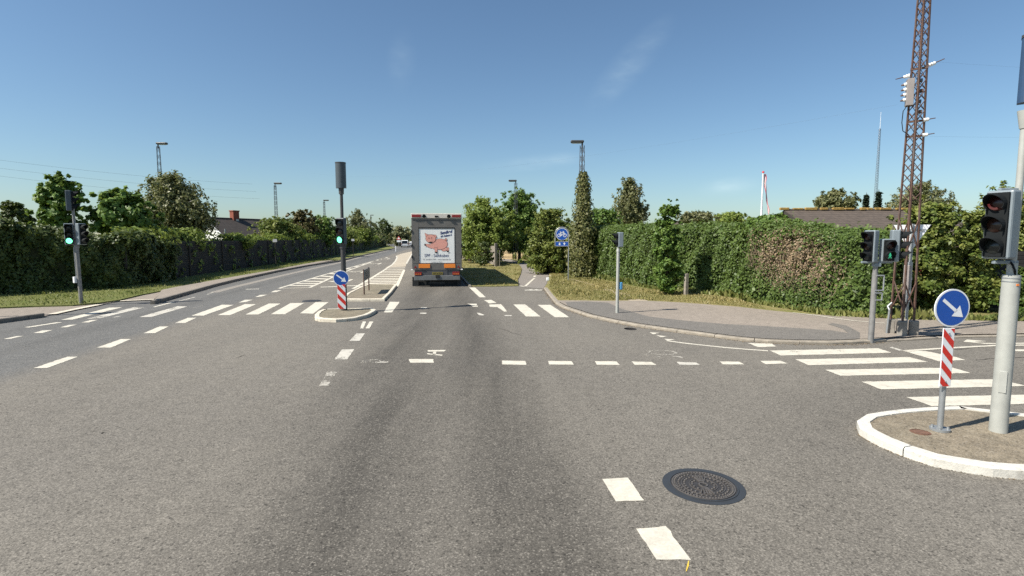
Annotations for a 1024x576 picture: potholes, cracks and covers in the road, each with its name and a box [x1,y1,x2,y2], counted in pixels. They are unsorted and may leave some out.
manhole cover [662,468,746,505]
